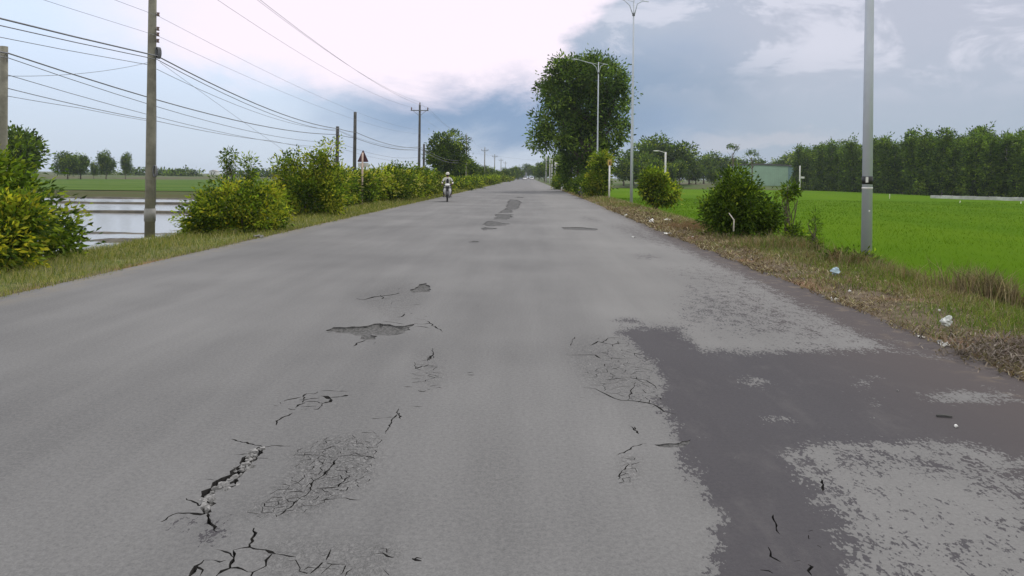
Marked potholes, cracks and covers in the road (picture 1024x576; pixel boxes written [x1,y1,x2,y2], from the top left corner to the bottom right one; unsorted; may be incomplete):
crack [763,515,780,573]
pothole [326,323,414,342]
crack [570,337,690,483]
pothole [410,283,431,293]
crack [328,293,441,346]
crack [162,348,440,576]
pothole [500,199,521,213]
